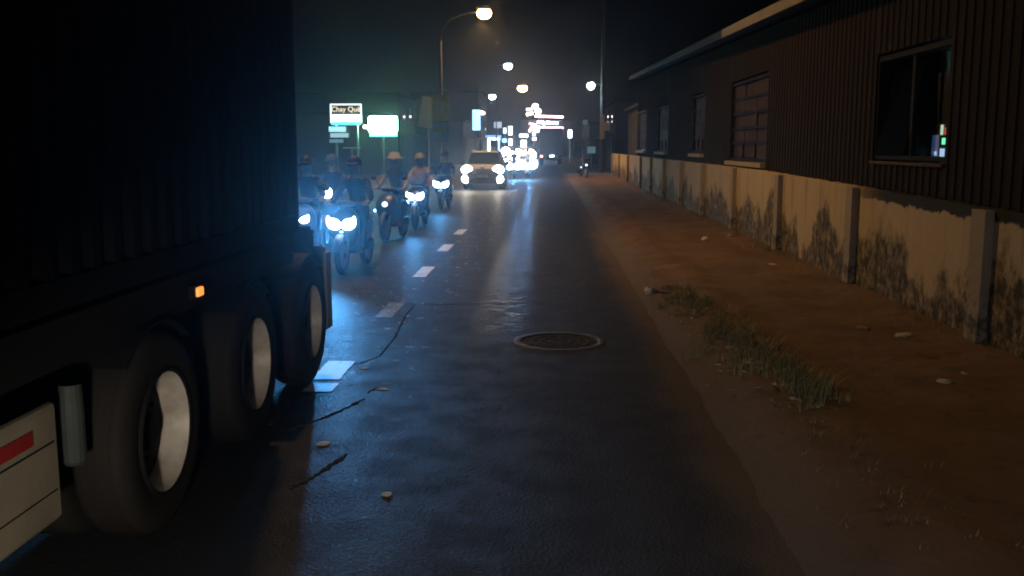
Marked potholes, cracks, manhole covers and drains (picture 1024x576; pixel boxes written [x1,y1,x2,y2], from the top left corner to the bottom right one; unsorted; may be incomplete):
manhole cover [513,332,606,351]
